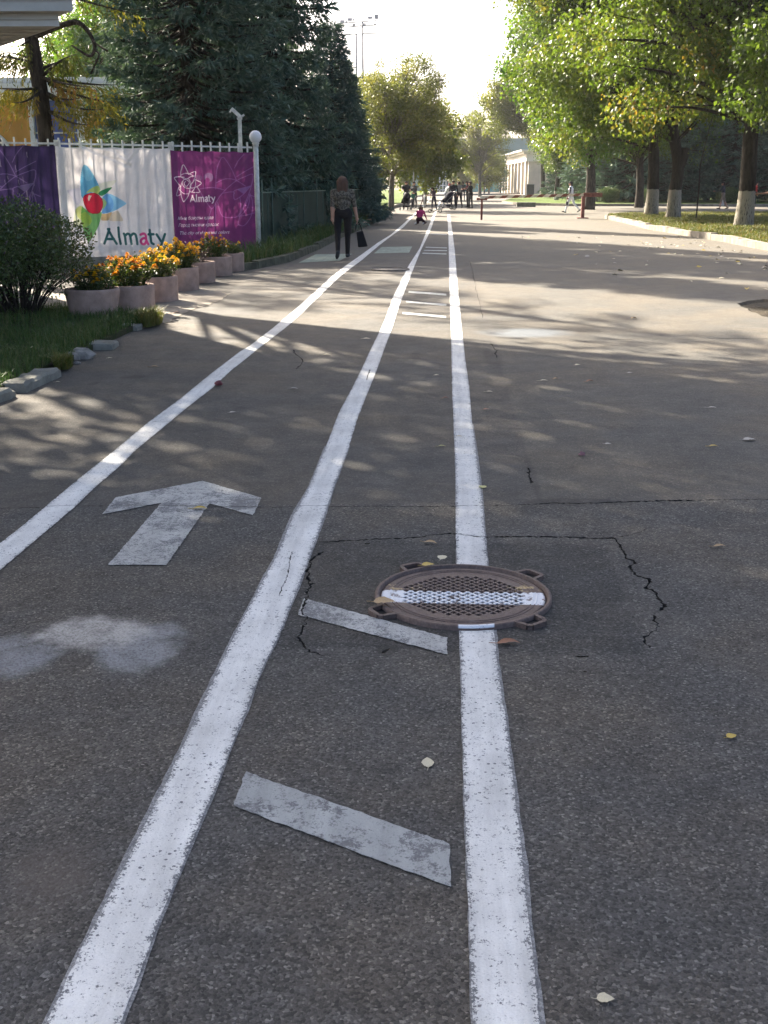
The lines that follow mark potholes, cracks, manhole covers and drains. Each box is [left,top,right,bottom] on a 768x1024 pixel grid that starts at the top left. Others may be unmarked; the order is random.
manhole cover [368,562,552,631]
crack [279,530,667,656]
